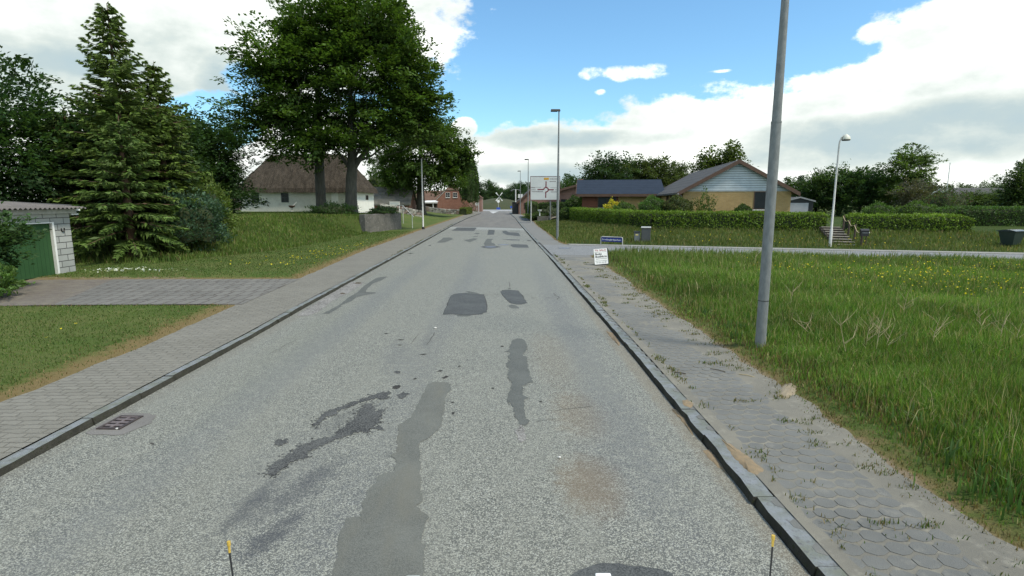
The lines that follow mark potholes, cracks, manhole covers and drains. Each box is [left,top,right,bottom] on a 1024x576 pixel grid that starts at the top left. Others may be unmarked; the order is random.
drain grate [96,415,144,430]
